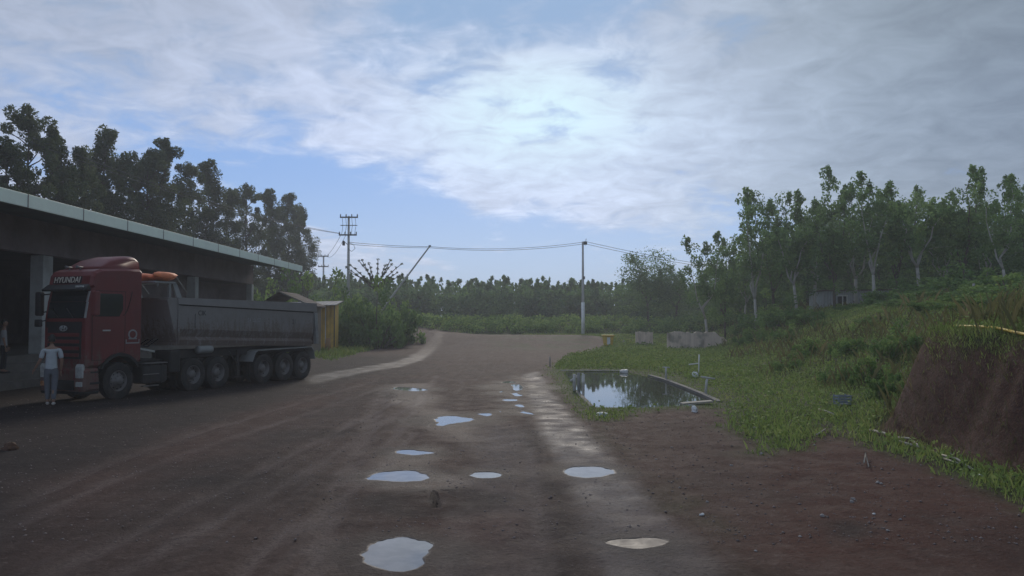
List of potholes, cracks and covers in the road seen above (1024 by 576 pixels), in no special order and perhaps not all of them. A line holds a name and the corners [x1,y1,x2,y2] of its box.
pothole [380,446,451,458]
pothole [337,466,450,486]
pothole [544,461,647,485]
pothole [329,529,459,576]
pothole [421,414,486,428]
